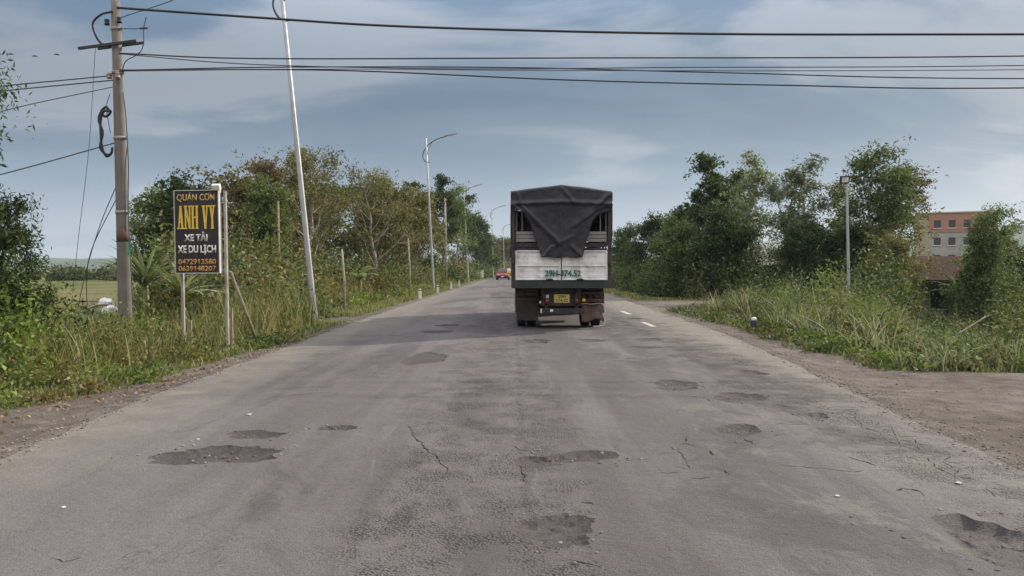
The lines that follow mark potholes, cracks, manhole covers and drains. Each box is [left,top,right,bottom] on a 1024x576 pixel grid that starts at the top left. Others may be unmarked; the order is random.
pothole [401,352,448,366]
pothole [148,445,284,465]
pothole [652,380,700,391]
pothole [228,430,288,439]
pothole [512,450,620,469]
crack [408,426,450,474]
pothole [930,513,1024,573]
pothole [513,513,596,548]
pothole [713,392,769,403]
pothole [800,412,831,420]
crack [661,436,729,479]
pothole [704,423,761,438]
